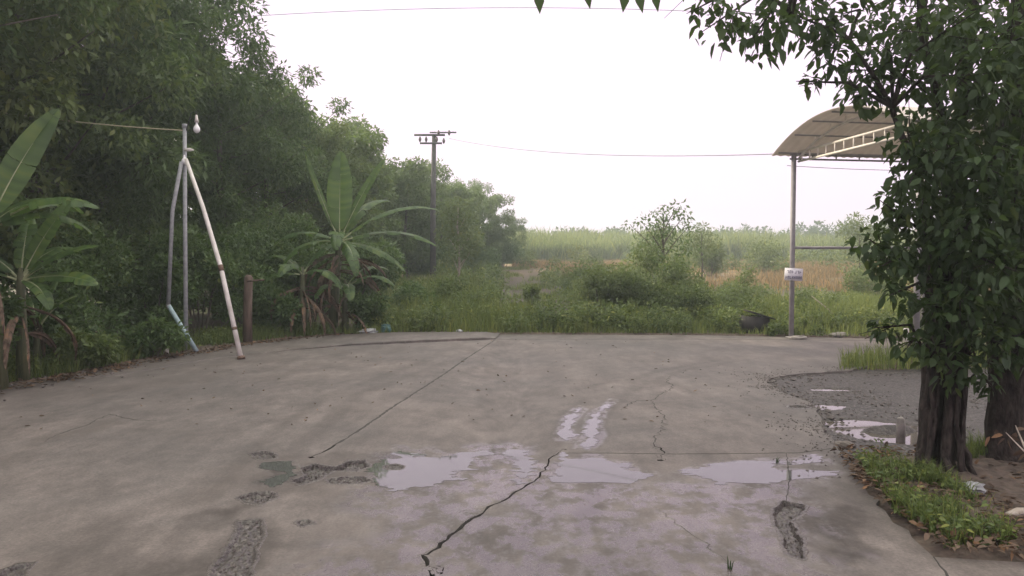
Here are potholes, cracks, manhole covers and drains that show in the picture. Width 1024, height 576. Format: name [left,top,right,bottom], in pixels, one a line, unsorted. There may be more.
pothole [769,500,810,561]
crack [310,339,566,576]
pothole [0,561,38,576]
crack [619,376,675,461]
pothole [207,518,268,576]
pothole [293,519,318,528]
pothole [287,459,372,486]
crack [655,508,733,576]
pothole [234,491,280,506]
crack [46,414,150,441]
pothole [248,450,278,460]
